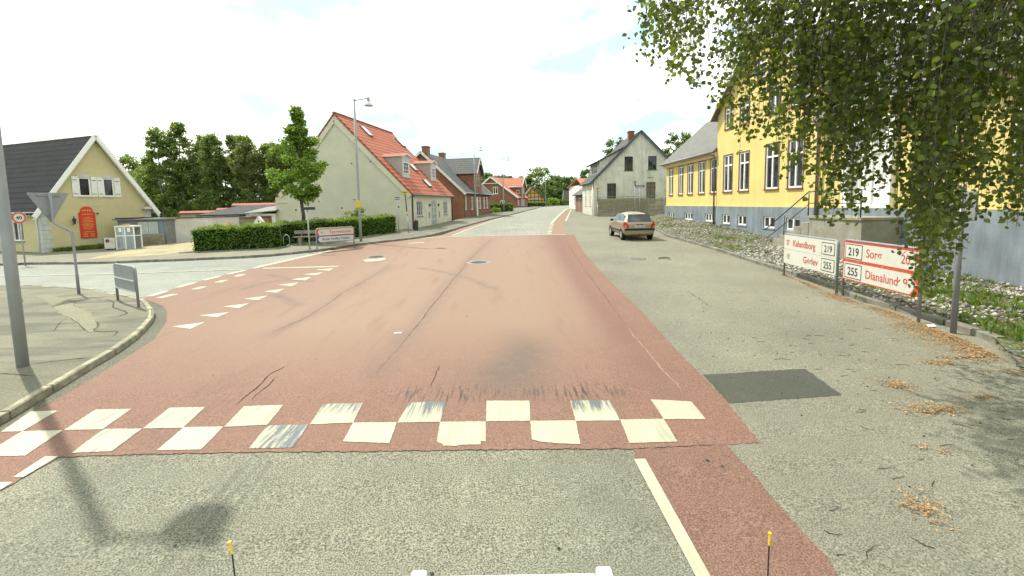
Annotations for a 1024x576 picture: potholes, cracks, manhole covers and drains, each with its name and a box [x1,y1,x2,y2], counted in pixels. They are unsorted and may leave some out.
crack [237,366,285,404]
crack [53,296,128,336]
crack [377,244,486,372]
